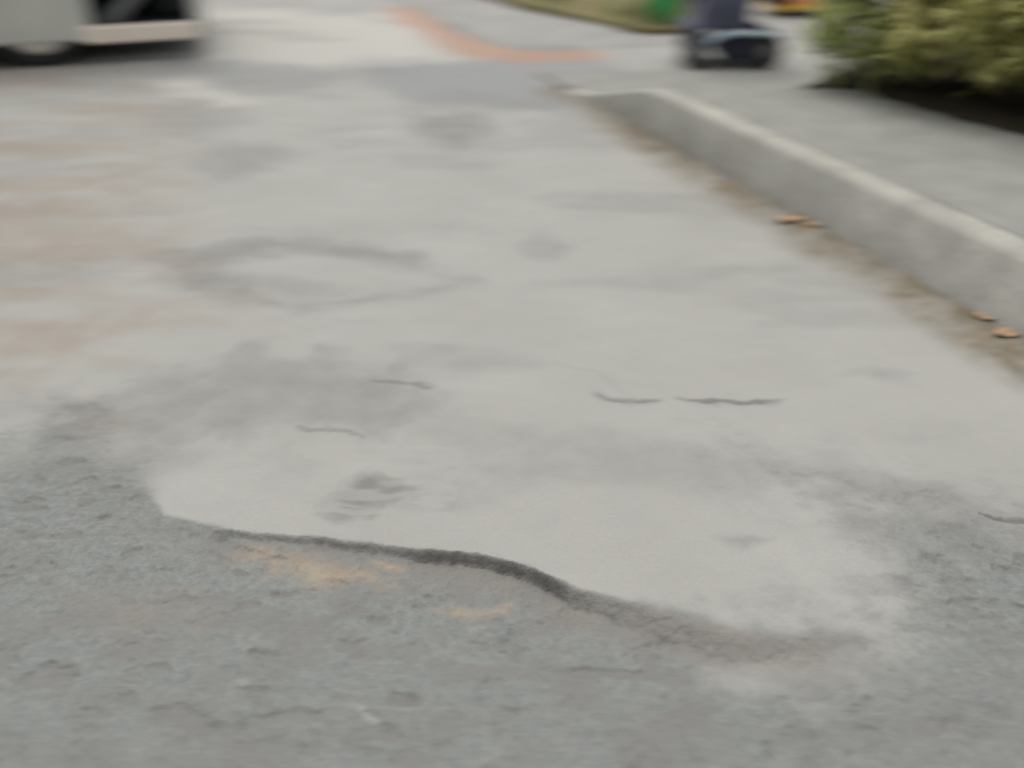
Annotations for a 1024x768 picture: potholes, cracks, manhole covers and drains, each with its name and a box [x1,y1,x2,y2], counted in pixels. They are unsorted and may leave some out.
crack [971,509,1024,527]
crack [292,423,371,443]
crack [362,377,437,392]
crack [541,357,789,408]
